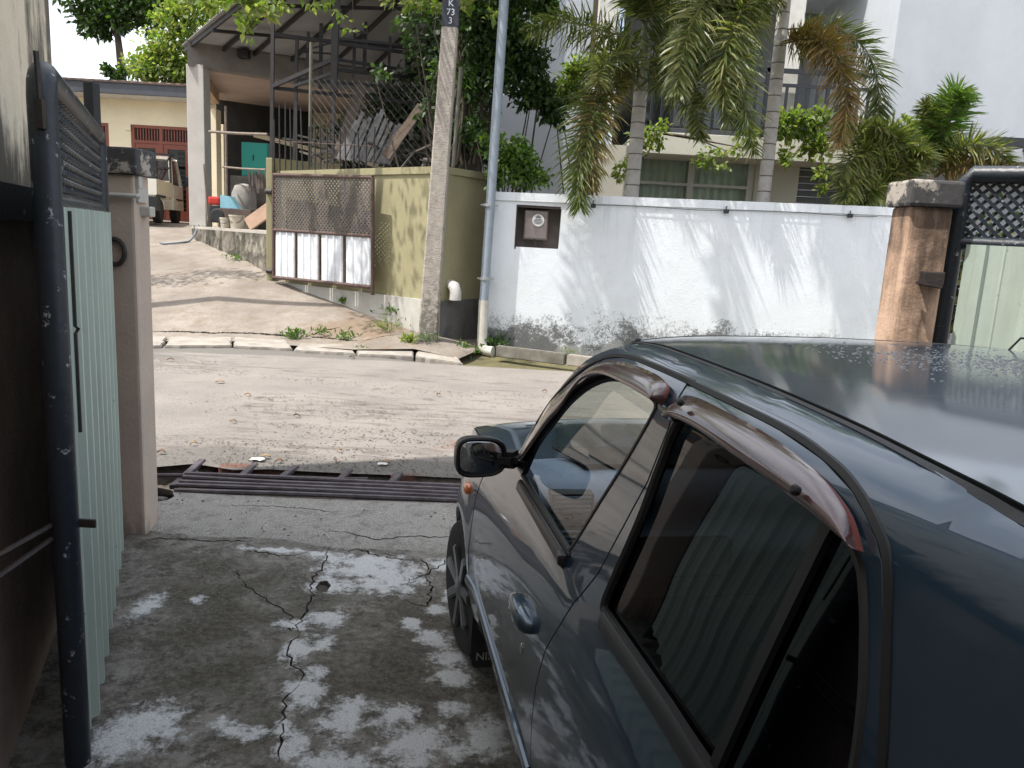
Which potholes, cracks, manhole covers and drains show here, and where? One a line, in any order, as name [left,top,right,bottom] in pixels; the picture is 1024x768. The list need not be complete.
drain grate [157,459,460,503]
crack [234,545,446,761]
pothole [315,581,331,593]
